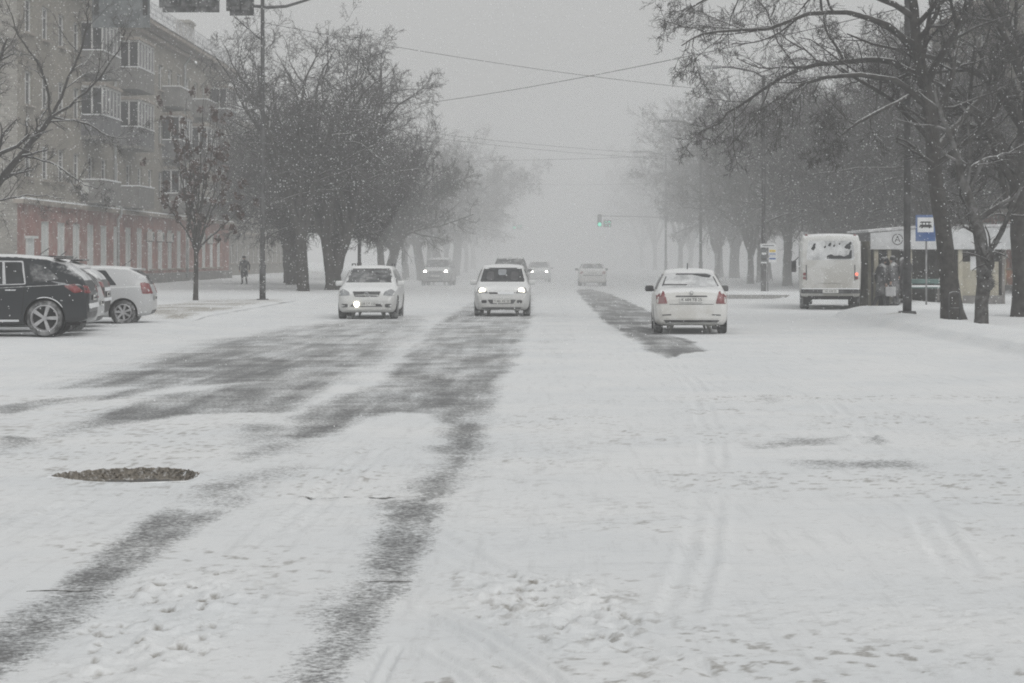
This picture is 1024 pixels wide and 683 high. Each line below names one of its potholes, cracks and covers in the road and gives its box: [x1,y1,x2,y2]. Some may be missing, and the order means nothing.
pothole [47,467,200,483]
